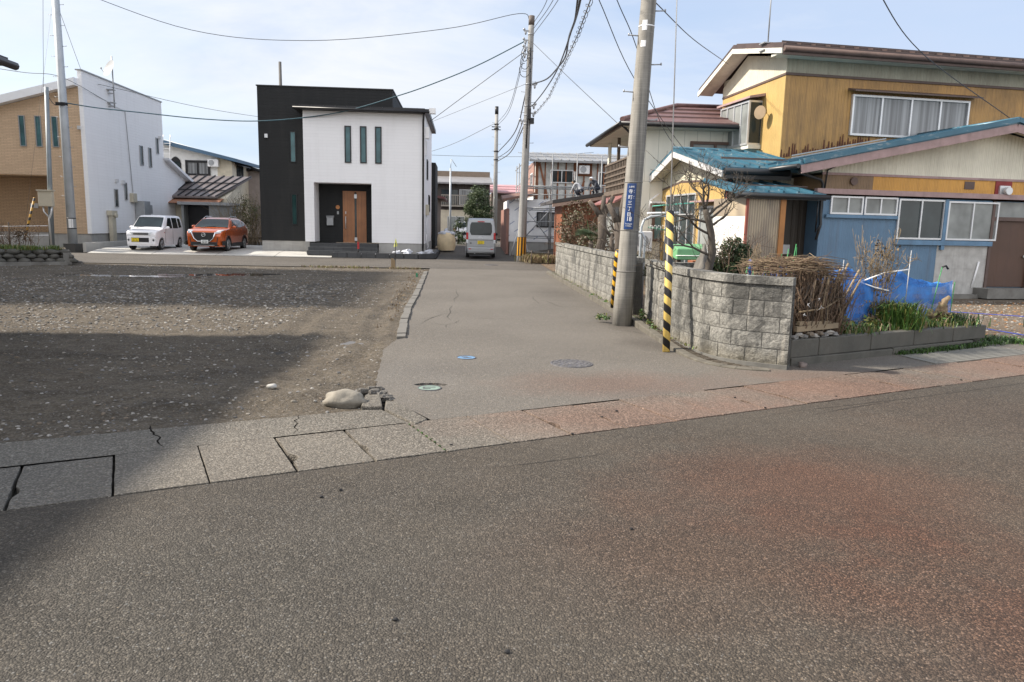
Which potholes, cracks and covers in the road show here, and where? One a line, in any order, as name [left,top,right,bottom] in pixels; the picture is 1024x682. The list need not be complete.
manhole cover [550,359,593,368]
